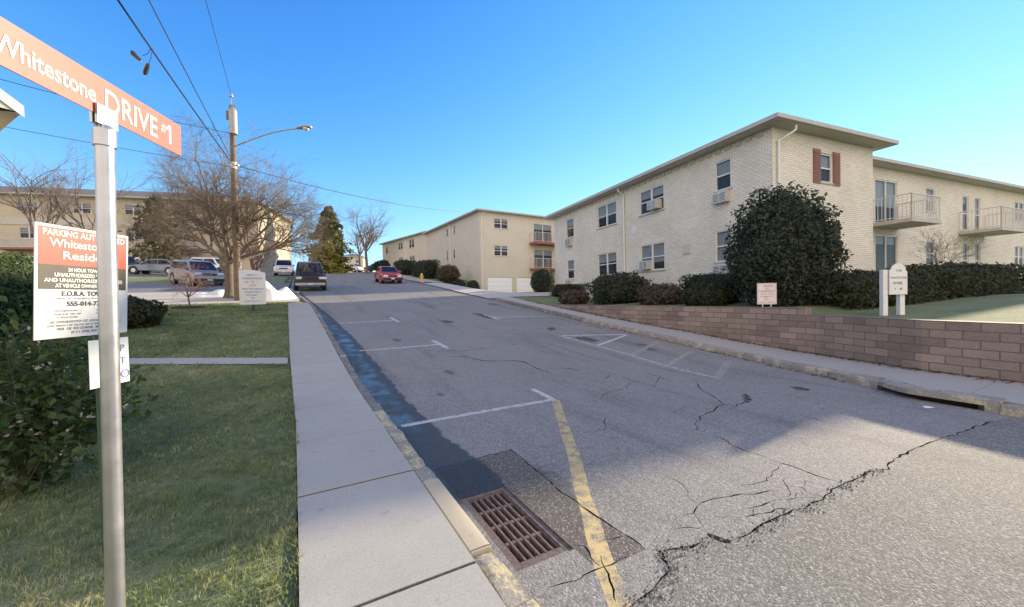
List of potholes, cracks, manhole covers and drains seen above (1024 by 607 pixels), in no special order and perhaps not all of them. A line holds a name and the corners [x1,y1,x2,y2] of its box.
drain grate [877,378,1007,414]
crack [542,379,835,607]
crack [431,345,672,399]
drain grate [460,485,574,571]
